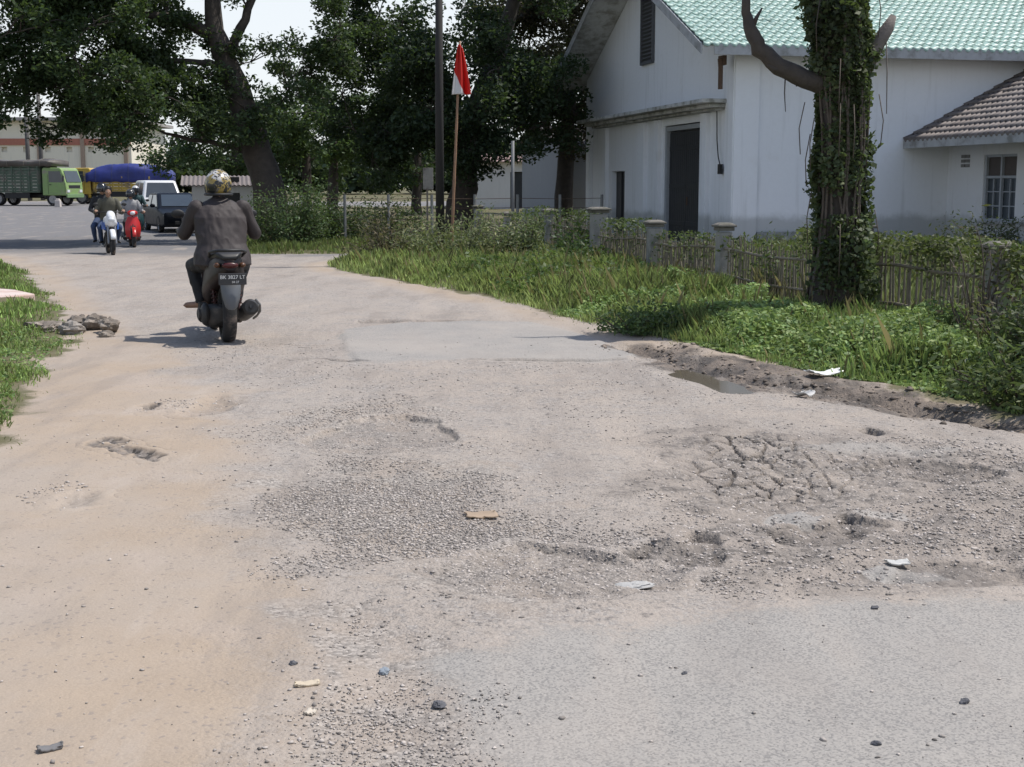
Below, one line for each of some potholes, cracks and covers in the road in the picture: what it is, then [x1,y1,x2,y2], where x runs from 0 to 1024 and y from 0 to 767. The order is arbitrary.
crack [641,426,934,525]
pothole [607,519,746,584]
pothole [723,510,907,553]
pothole [75,434,190,465]
pothole [373,537,713,614]
